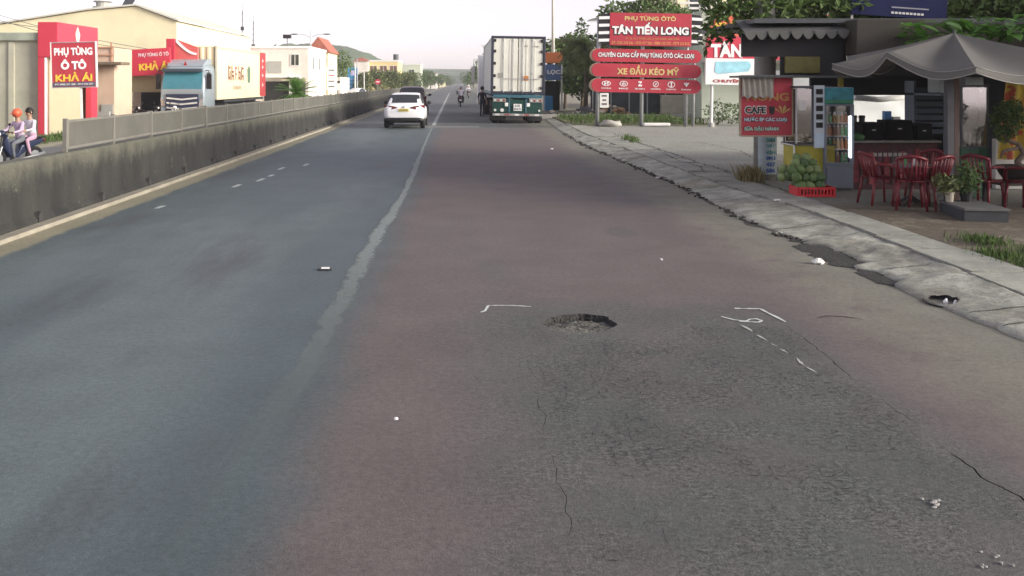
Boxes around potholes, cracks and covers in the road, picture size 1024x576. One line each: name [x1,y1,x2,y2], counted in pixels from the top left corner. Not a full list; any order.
pothole [544,314,617,334]
pothole [922,295,960,308]
crack [532,326,1024,561]
